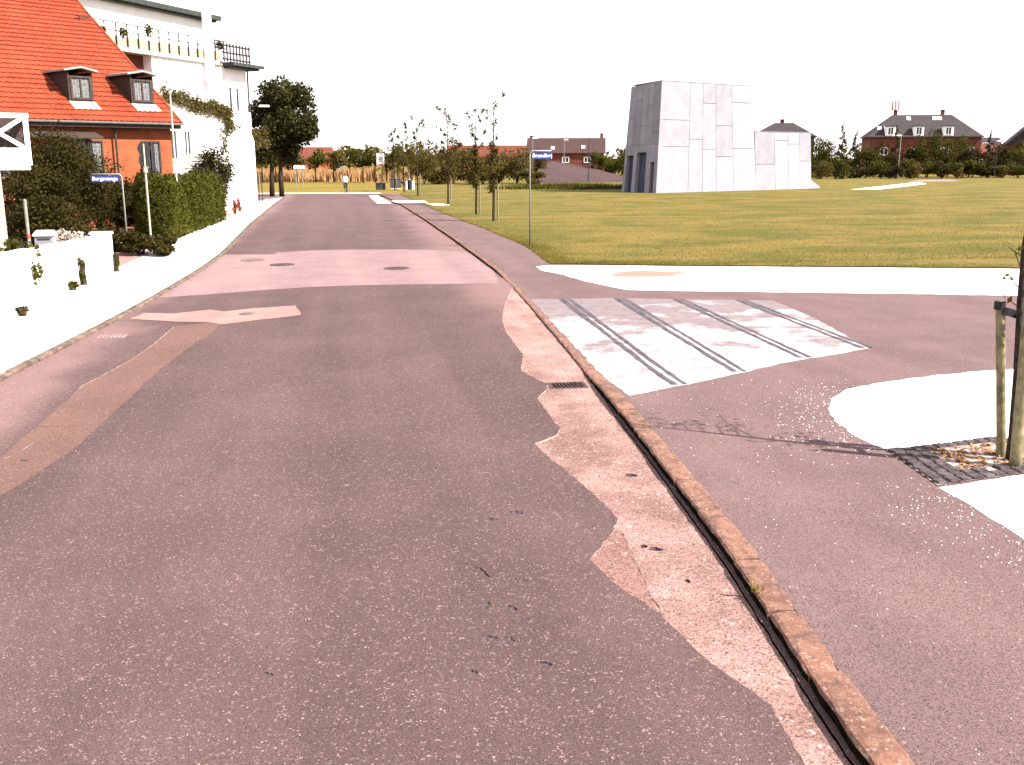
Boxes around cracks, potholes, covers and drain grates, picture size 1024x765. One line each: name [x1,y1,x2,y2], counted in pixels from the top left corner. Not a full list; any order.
drain grate [547,381,589,389]
